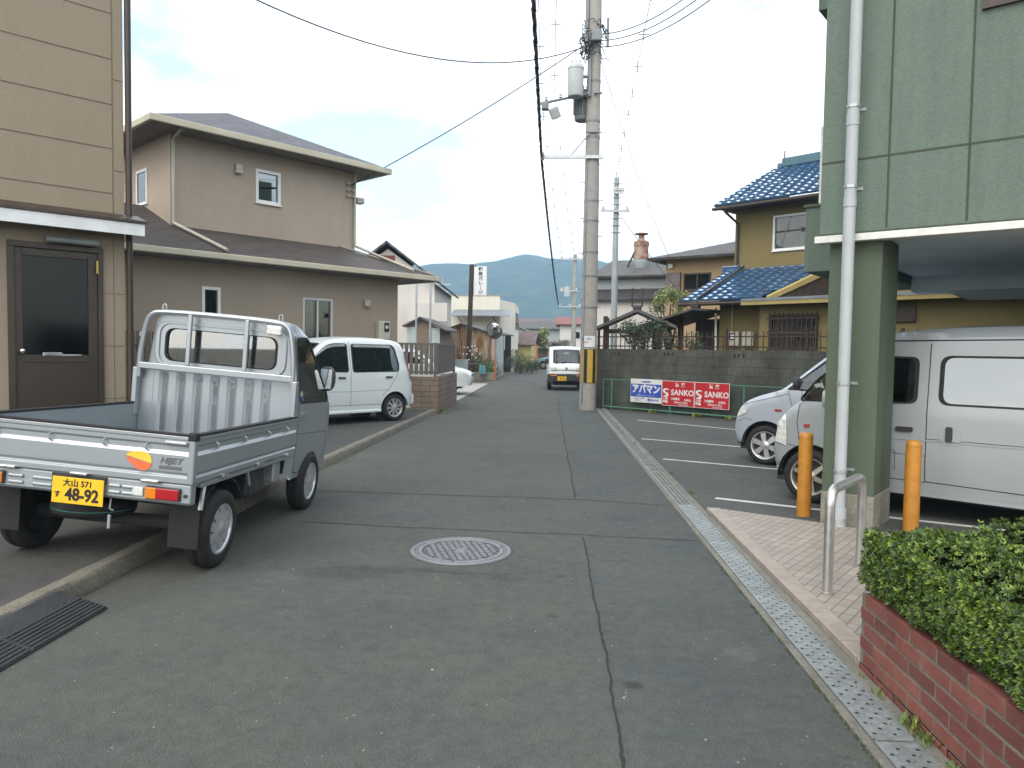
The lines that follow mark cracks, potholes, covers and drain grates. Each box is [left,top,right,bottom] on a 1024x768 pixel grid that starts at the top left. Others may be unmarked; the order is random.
manhole cover [408,537,513,566]
